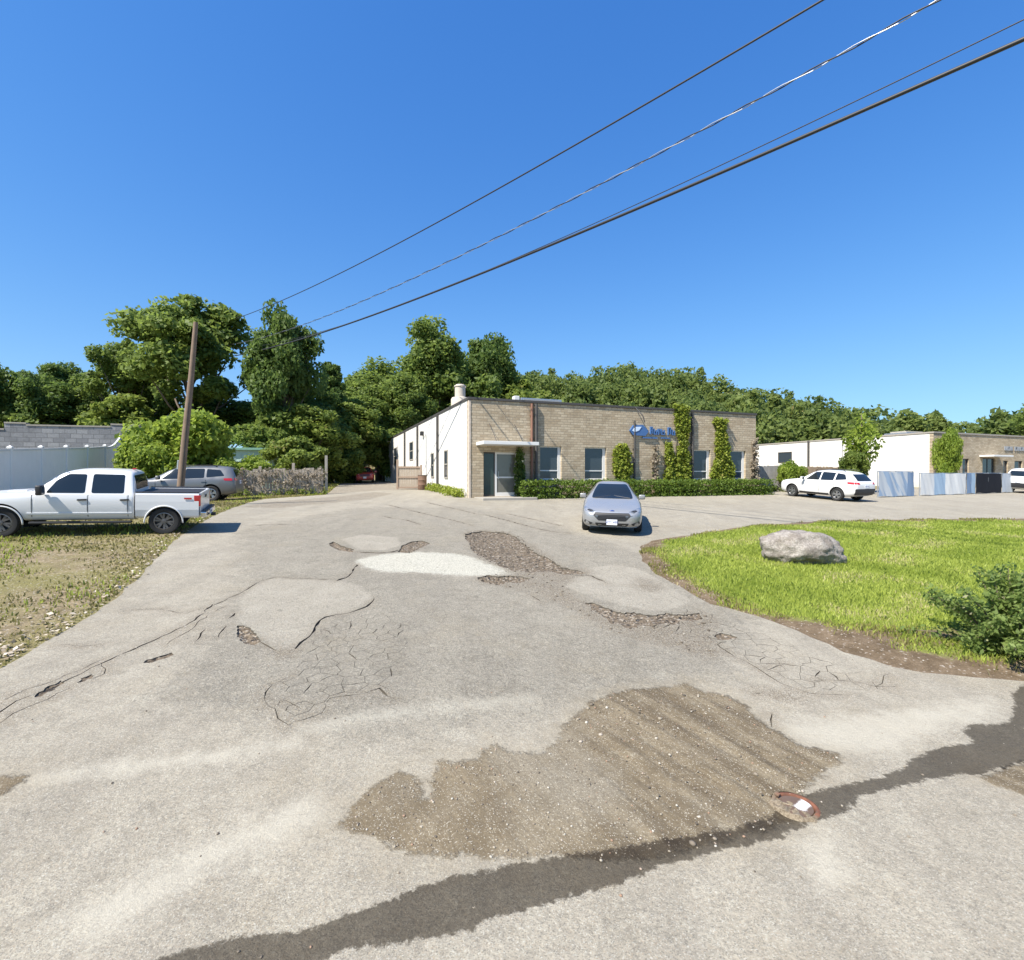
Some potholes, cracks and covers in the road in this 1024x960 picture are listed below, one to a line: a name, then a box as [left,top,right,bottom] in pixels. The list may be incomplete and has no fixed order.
crack [0,550,398,721]
manhole cover [769,791,822,822]
crack [650,608,896,695]
pothole [465,531,583,575]
pothole [237,625,261,645]
pothole [585,603,703,629]
